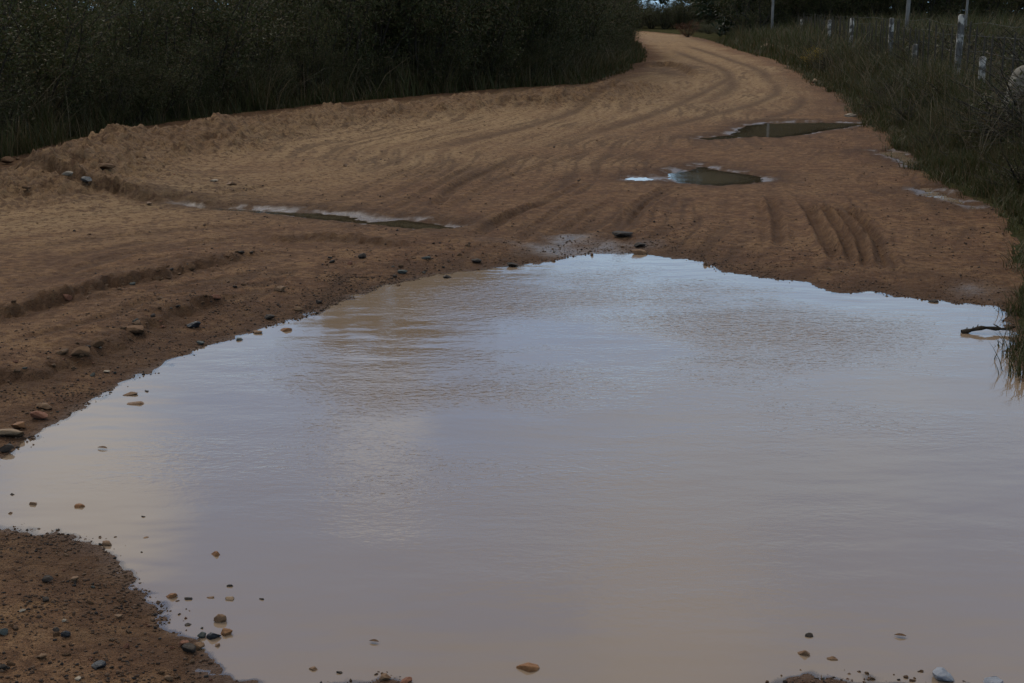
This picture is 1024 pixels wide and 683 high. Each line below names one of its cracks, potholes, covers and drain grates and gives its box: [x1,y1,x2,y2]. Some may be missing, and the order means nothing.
pothole [0,250,1024,683]
pothole [690,119,862,140]
pothole [661,162,774,186]
pothole [182,199,467,229]
